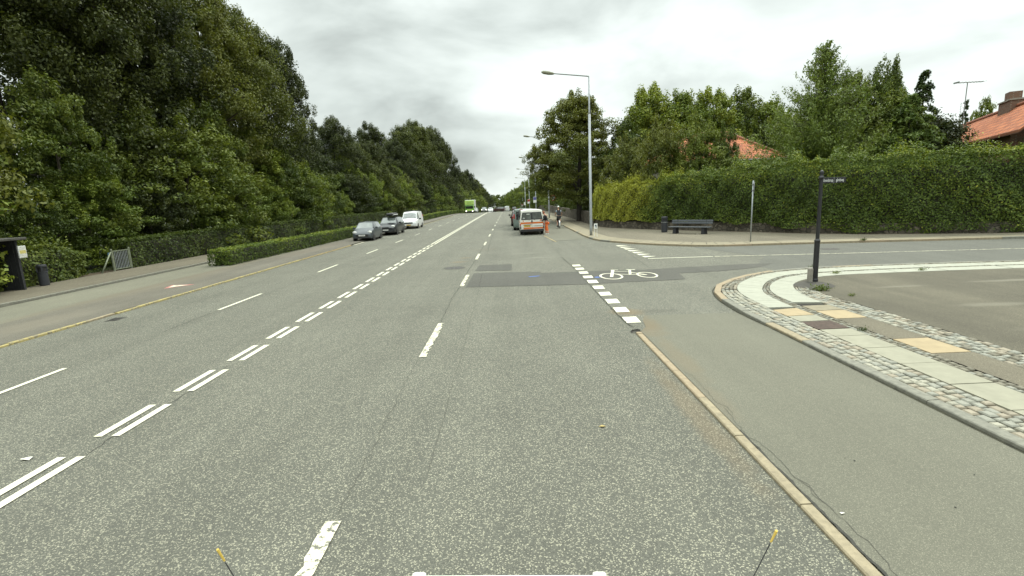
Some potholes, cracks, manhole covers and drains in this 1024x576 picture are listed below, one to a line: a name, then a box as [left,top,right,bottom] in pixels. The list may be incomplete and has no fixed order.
crack [338,362,417,514]
crack [427,238,492,474]
